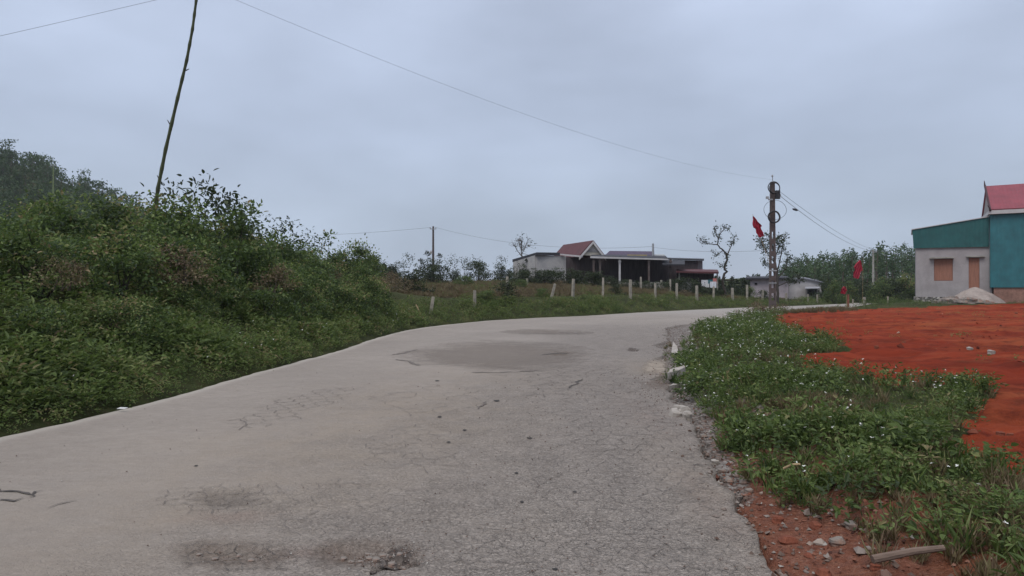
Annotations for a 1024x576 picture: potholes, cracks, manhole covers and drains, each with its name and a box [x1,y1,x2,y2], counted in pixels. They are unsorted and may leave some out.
pothole [377,546,423,571]
crack [155,386,487,541]
crack [0,489,72,507]
